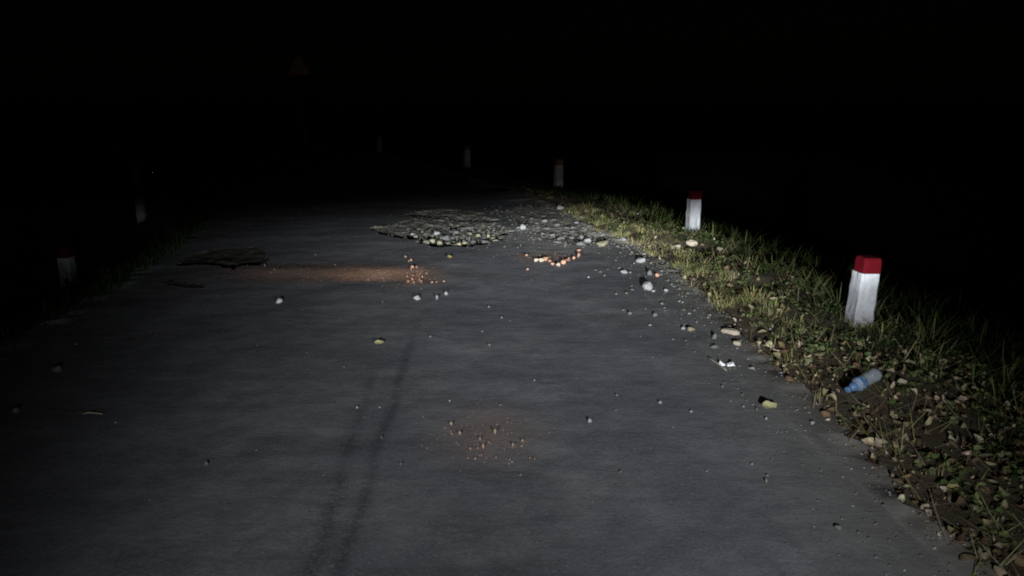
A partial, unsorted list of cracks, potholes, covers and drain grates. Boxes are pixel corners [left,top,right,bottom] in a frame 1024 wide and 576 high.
pothole [163,279,204,288]
pothole [369,209,515,247]
pothole [502,207,607,245]
